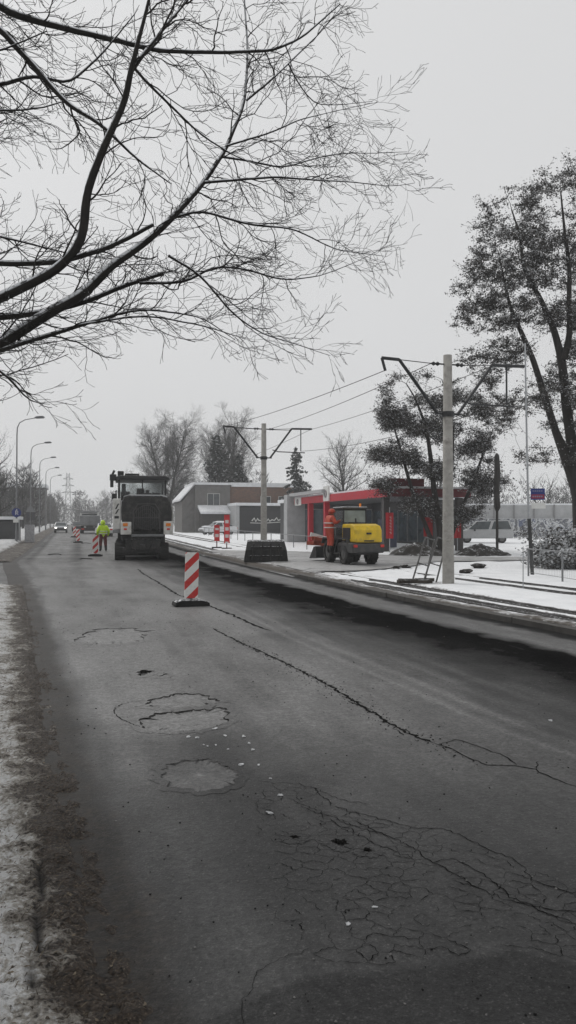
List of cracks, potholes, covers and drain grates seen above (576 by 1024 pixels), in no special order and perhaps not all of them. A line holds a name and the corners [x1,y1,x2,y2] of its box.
crack [138,569,574,786]
